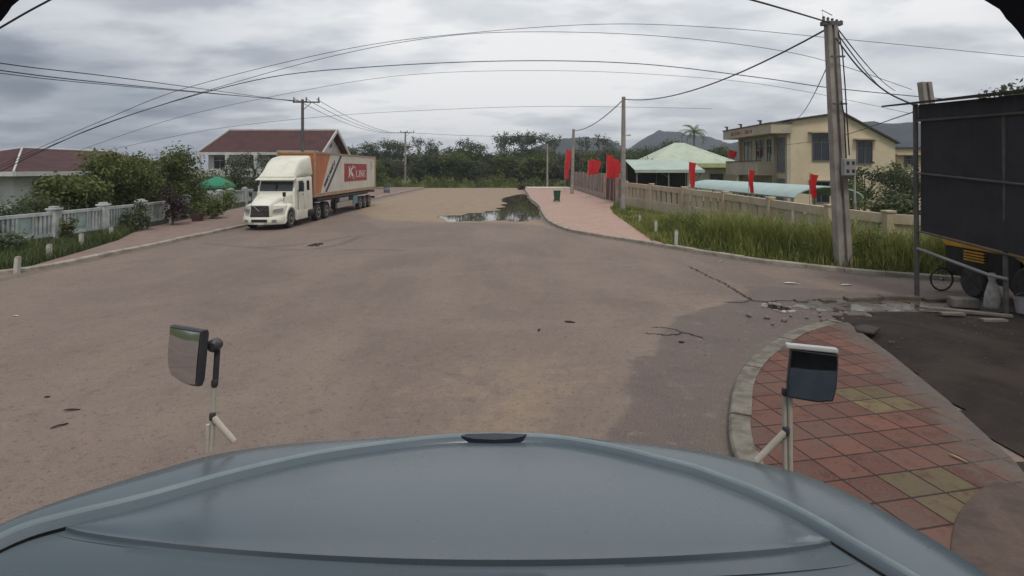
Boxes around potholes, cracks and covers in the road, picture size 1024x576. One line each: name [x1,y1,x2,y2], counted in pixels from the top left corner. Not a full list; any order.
crack [647,327,703,339]
crack [688,266,835,303]
pothole [761,302,797,313]
